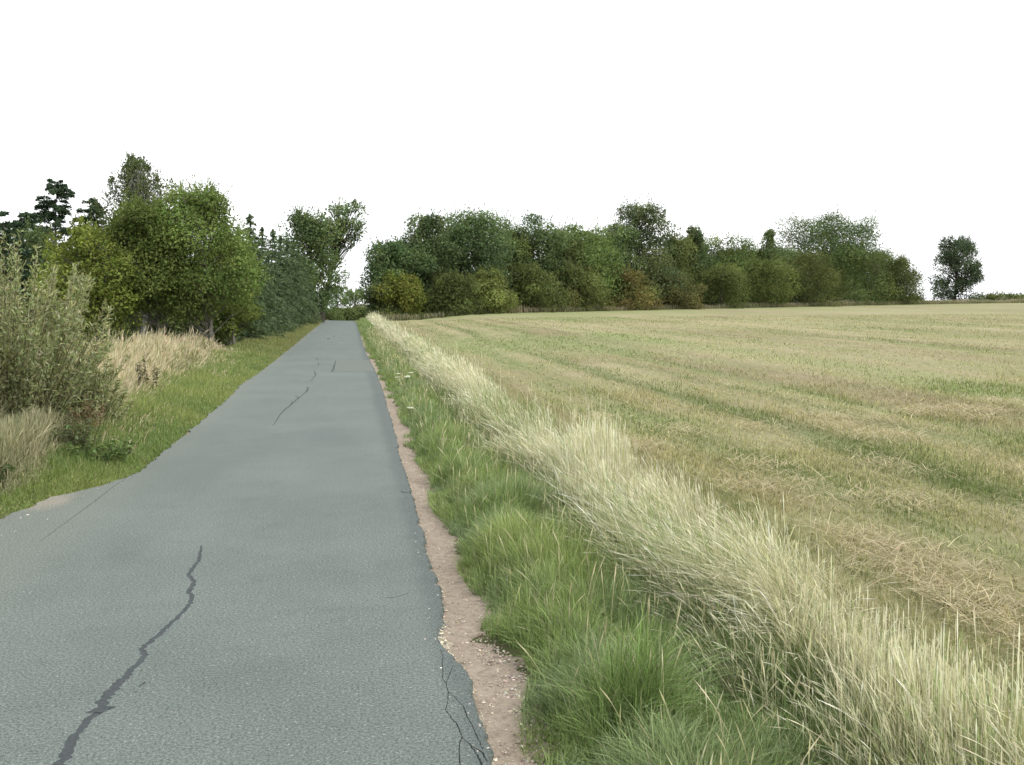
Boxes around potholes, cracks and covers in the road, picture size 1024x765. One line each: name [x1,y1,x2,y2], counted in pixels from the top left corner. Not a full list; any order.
crack [274,358,336,424]
crack [41,472,137,541]
crack [441,652,488,765]
